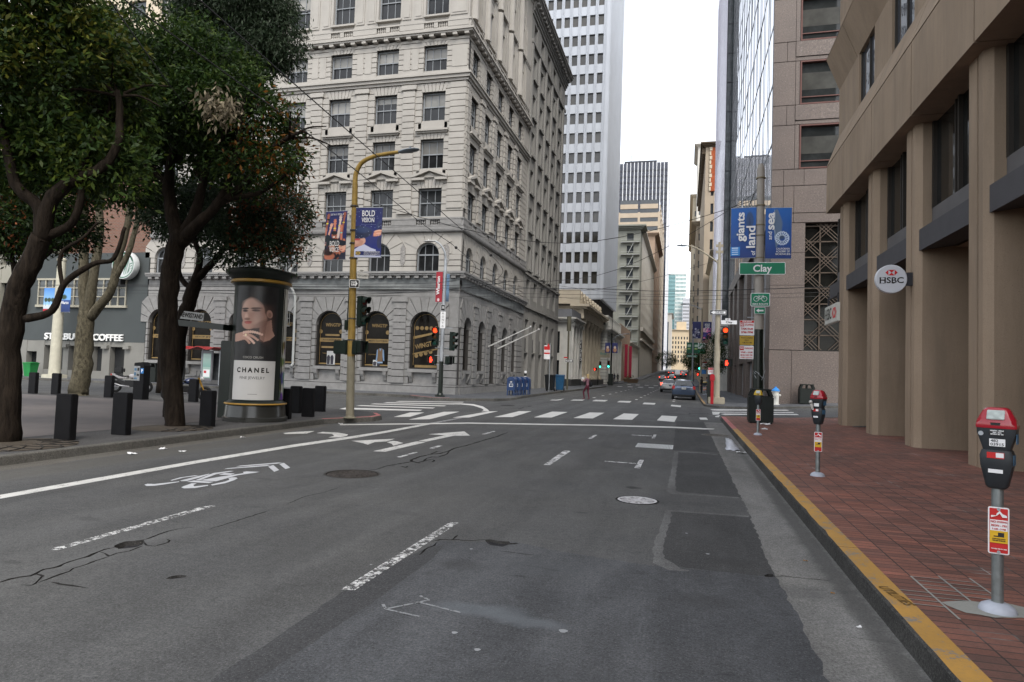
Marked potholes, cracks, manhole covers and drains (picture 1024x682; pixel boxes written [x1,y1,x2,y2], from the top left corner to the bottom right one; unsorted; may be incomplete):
pothole [485,539,519,547]
manhole cover [324,469,380,478]
pothole [114,539,145,549]
manhole cover [615,496,659,505]
crack [0,527,194,588]
crack [365,432,508,471]
